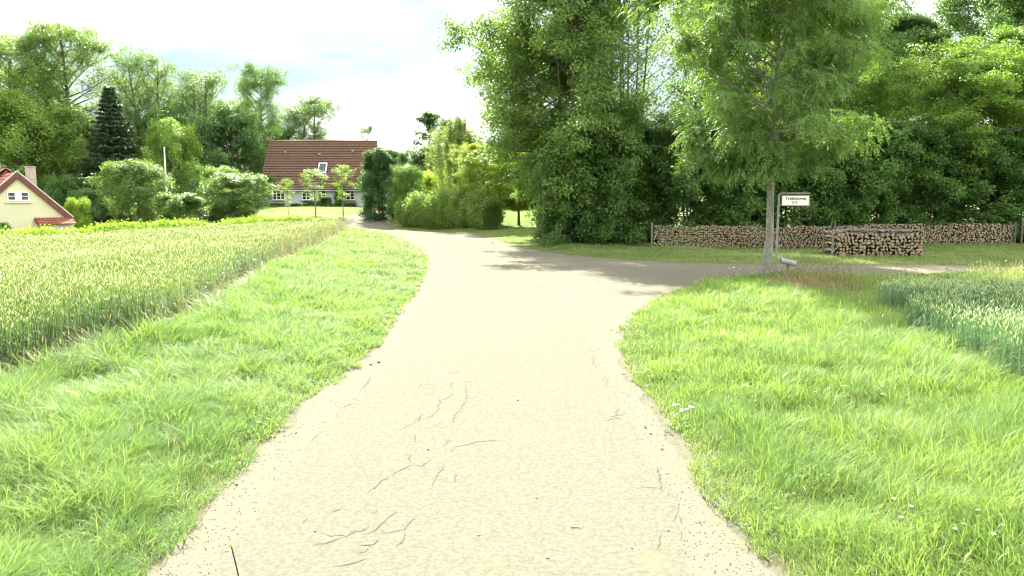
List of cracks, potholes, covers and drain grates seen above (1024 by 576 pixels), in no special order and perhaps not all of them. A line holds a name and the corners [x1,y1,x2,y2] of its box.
crack [367,372,498,493]
crack [317,513,415,566]
